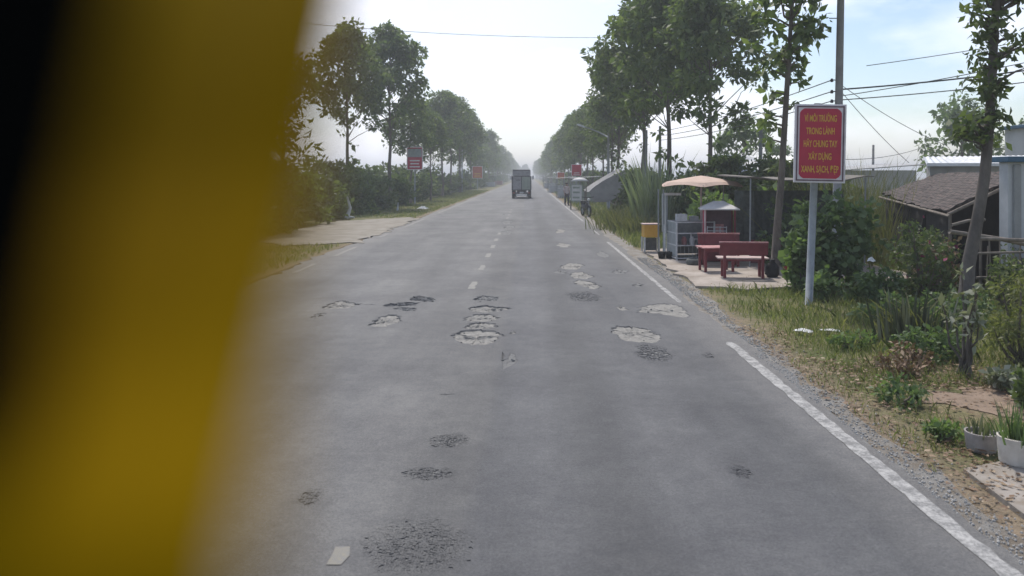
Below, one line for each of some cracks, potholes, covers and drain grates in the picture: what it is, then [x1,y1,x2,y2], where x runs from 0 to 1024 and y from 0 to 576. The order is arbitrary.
pothole [368,314,402,327]
pothole [611,325,662,343]
pothole [323,300,359,309]
pothole [462,314,500,322]
pothole [450,329,505,345]
pothole [501,352,518,370]
pothole [636,303,691,318]
pothole [573,280,602,289]
